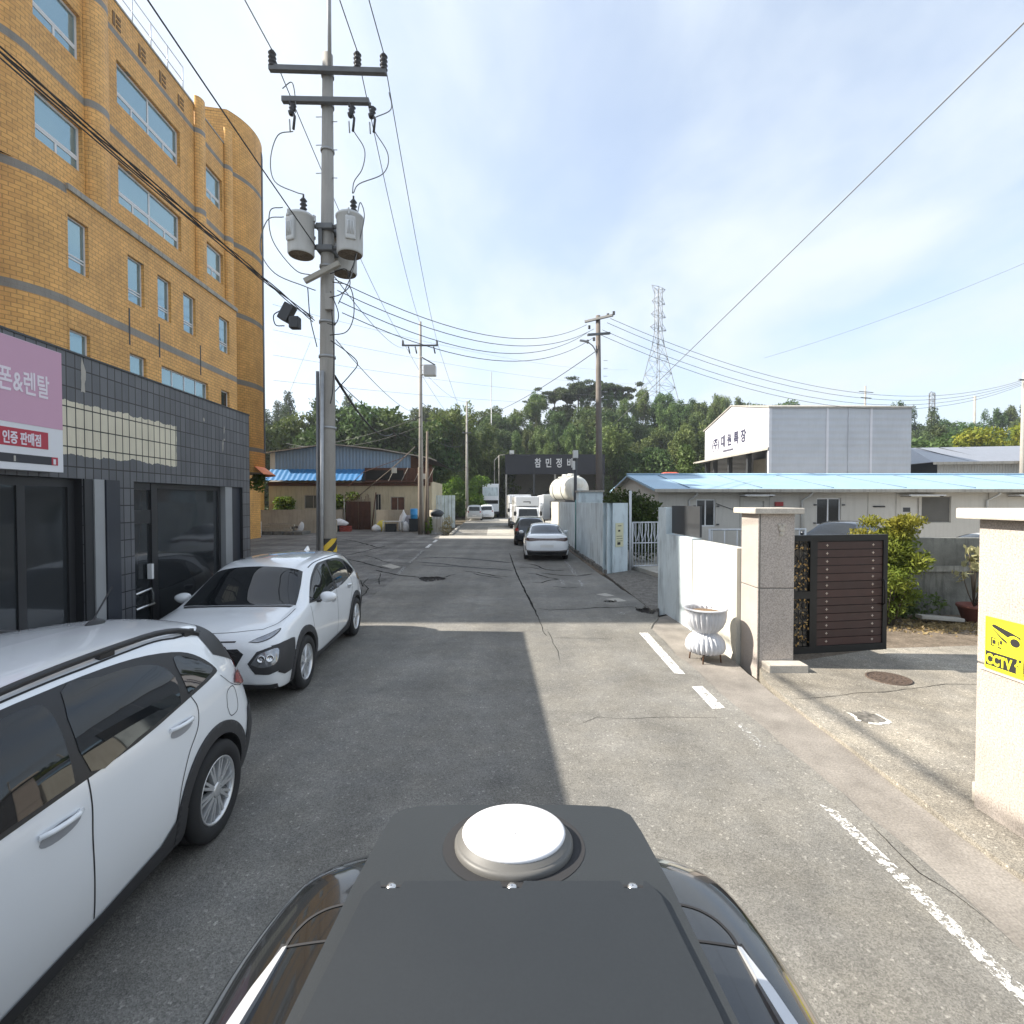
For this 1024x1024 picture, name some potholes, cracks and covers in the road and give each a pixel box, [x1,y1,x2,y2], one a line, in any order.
manhole cover [865,671,914,686]
crack [343,539,614,660]
crack [887,841,991,923]
